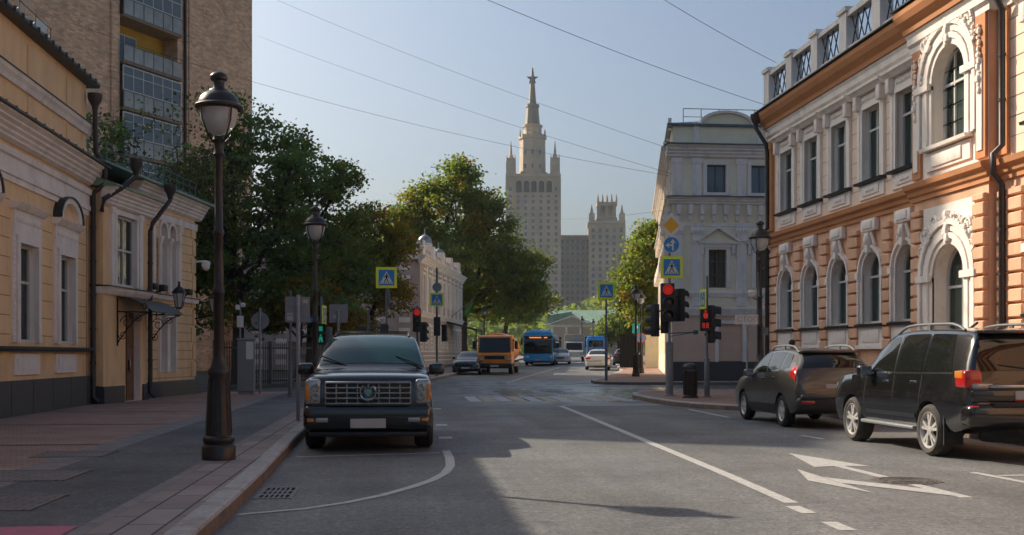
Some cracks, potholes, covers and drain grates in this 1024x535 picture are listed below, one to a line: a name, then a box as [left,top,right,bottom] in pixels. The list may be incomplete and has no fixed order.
drain grate [252,487,301,499]
